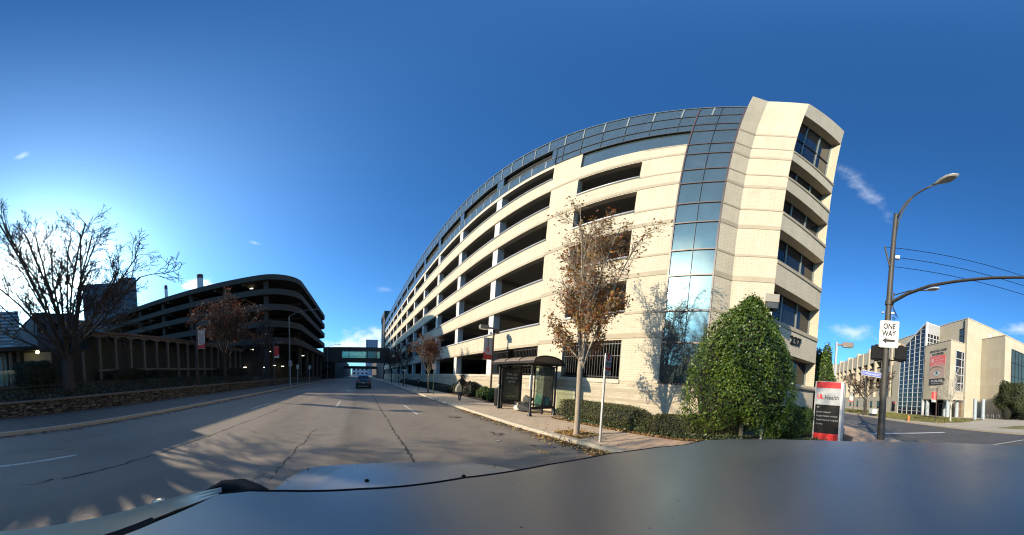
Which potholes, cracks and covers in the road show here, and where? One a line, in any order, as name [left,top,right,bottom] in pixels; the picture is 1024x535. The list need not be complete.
crack [234,418,315,481]
